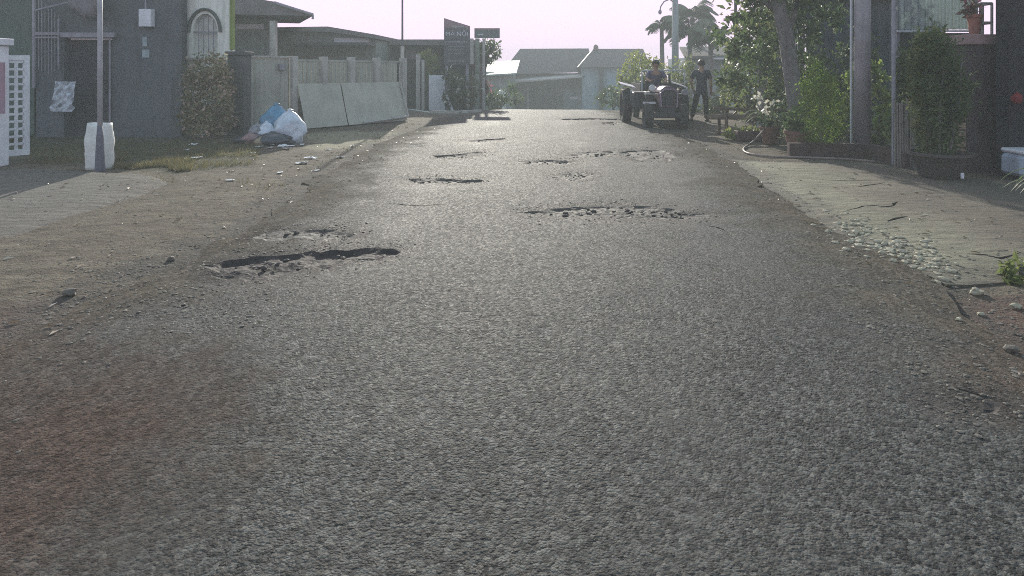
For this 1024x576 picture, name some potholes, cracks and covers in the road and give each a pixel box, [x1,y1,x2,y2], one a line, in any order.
crack [839,180,907,222]
pothole [619,149,676,162]
pothole [204,247,401,282]
pothole [433,151,483,159]
pothole [253,229,354,241]
pothole [526,205,714,220]
